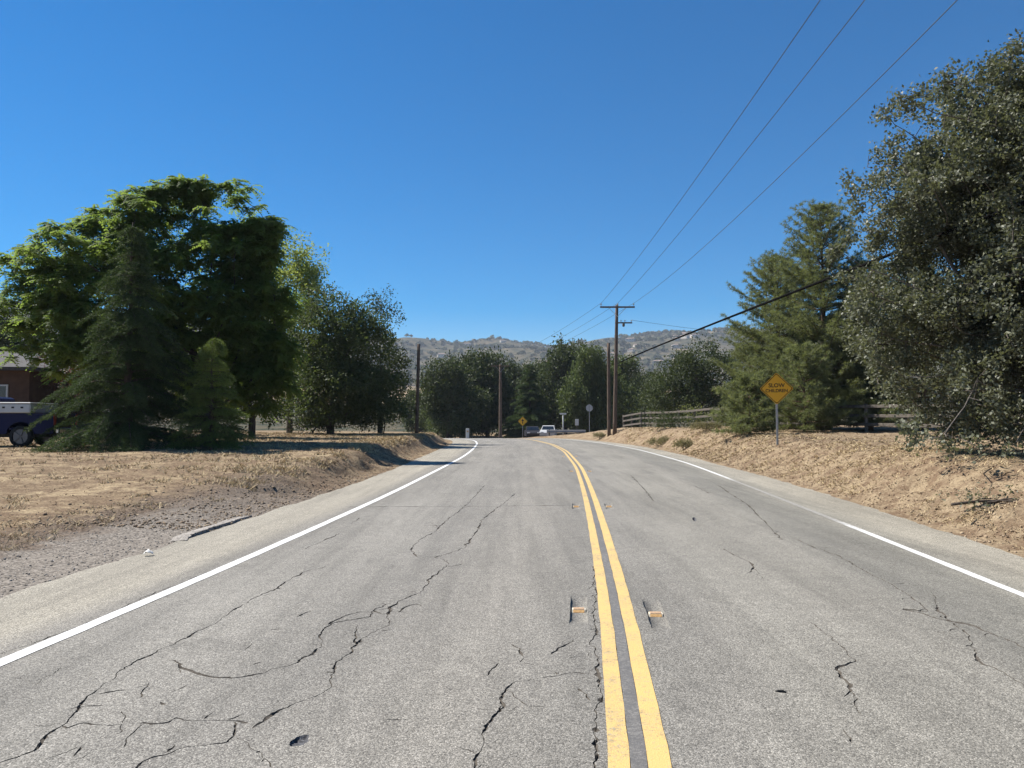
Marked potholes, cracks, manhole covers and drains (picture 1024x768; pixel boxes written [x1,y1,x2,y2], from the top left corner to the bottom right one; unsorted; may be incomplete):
crack [631,477,1024,683]
pothole [289,735,309,746]
crack [812,623,861,742]
crack [459,566,631,768]
crack [0,485,564,768]
